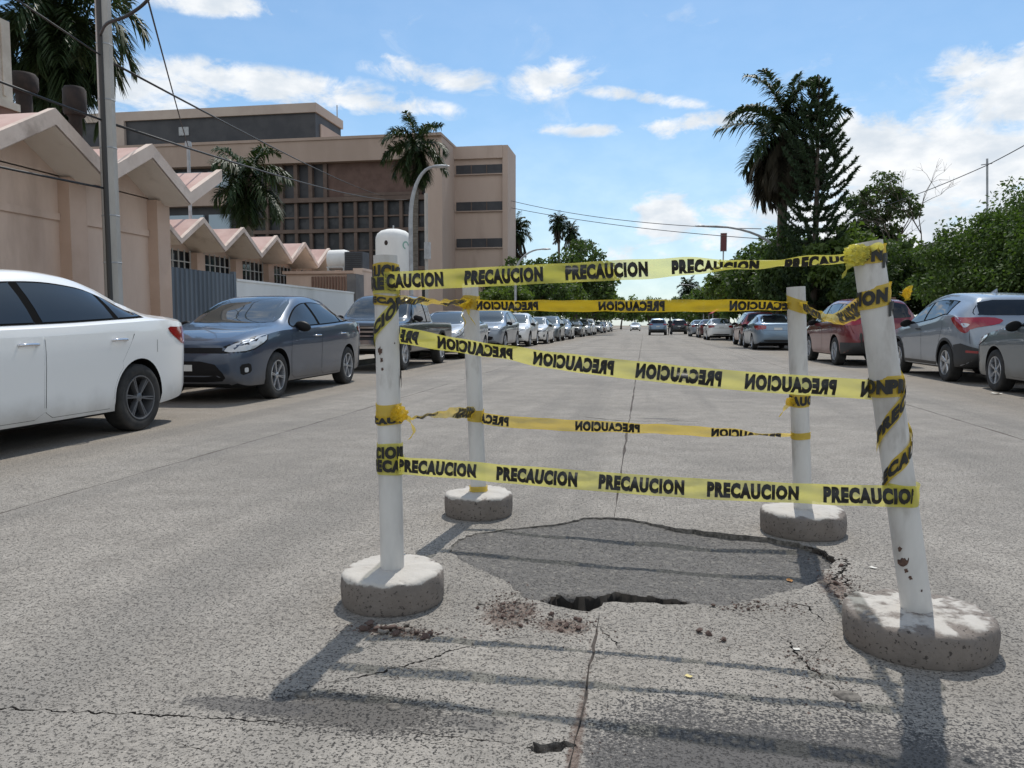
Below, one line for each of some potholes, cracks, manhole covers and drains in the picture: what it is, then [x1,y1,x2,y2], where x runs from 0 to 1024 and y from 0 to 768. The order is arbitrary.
pothole [449,517,836,612]
crack [0,706,297,725]
crack [324,636,535,682]
crack [734,546,854,690]
pothole [527,740,577,754]
